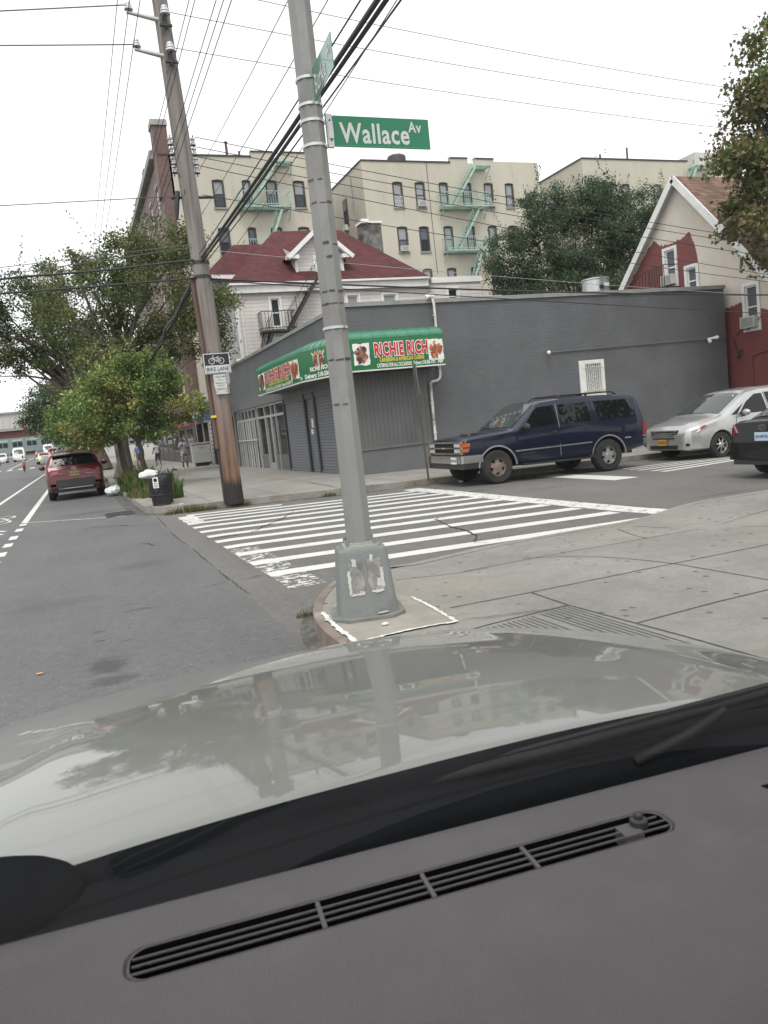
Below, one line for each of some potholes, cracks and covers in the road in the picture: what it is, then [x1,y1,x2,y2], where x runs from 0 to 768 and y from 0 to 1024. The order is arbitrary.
drain grate [105,510,136,518]
